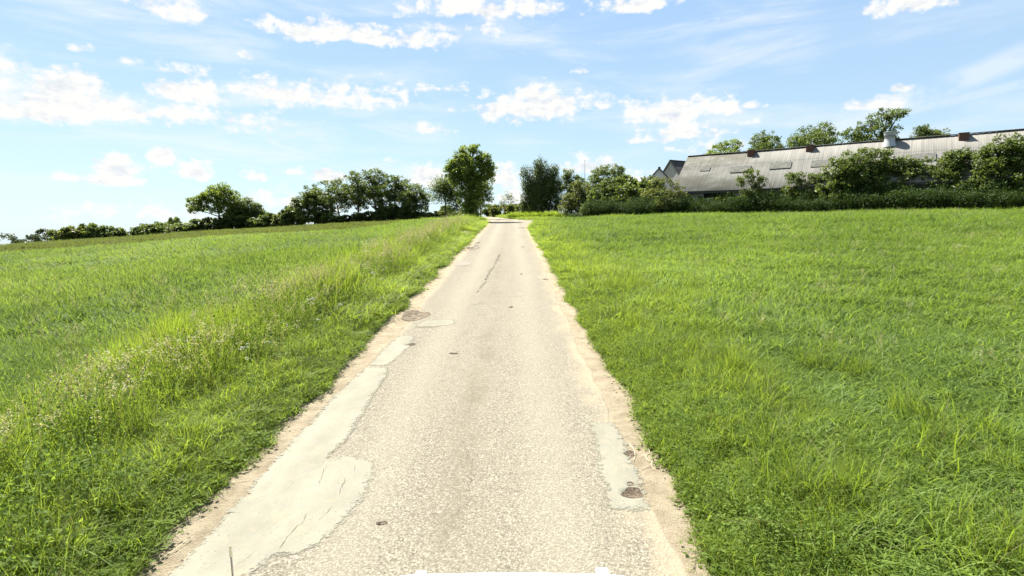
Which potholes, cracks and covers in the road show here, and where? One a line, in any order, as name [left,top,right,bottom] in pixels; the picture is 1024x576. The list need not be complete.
pothole [402,310,431,321]
pothole [620,487,643,498]
